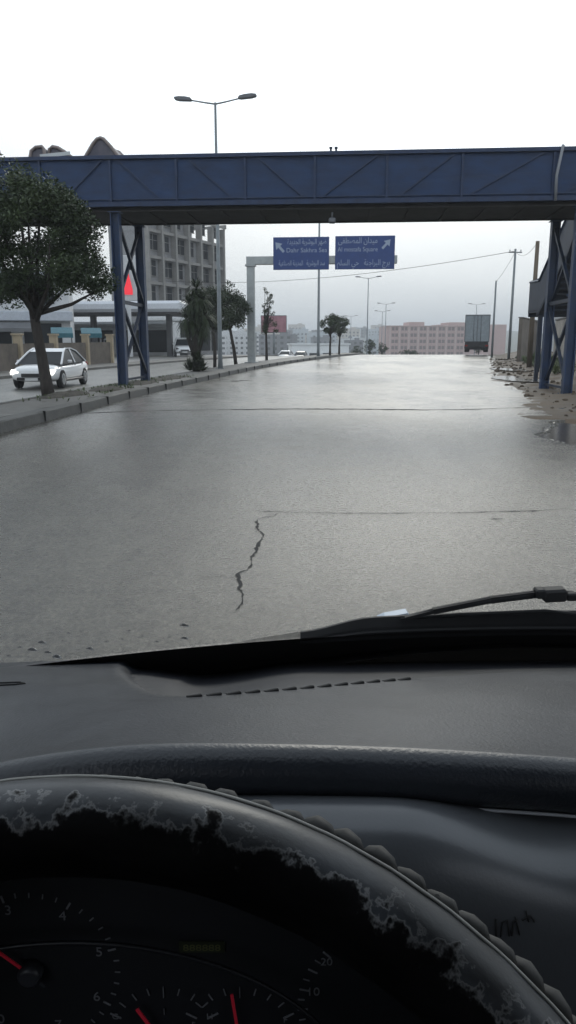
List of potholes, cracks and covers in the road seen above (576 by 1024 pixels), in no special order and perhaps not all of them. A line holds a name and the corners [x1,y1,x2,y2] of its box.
crack [195,508,566,610]
